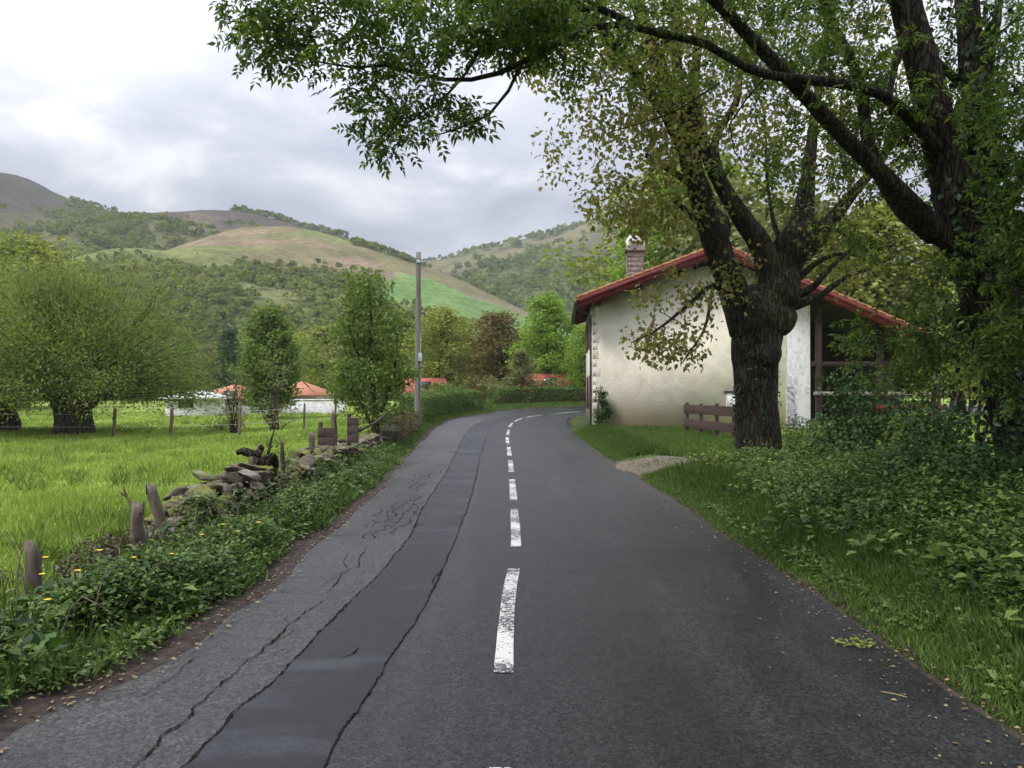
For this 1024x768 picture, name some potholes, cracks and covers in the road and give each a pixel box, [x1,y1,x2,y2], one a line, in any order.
crack [122,463,441,768]
